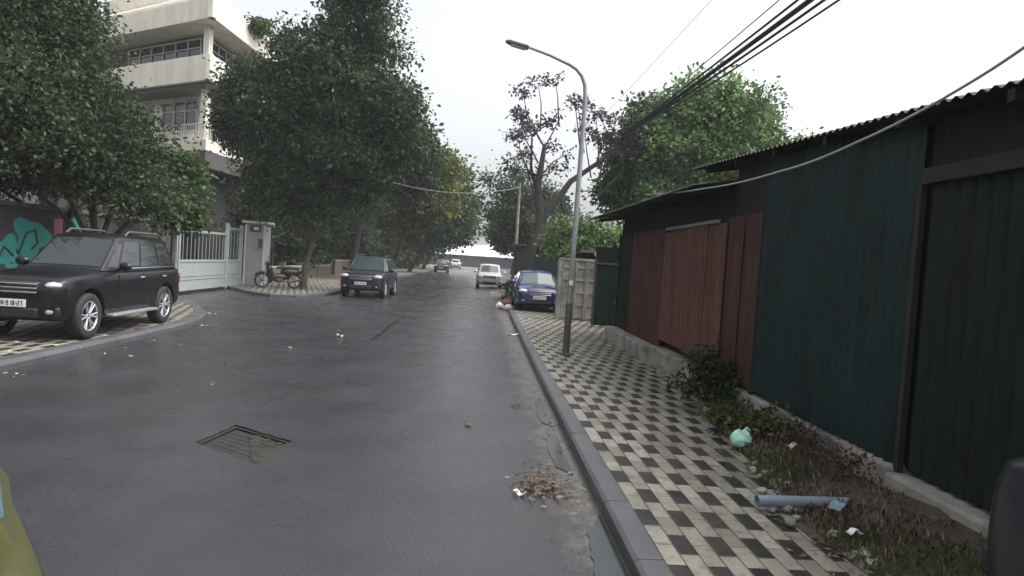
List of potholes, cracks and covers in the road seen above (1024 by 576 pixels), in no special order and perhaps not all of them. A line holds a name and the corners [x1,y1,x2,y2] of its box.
crack [328,314,422,364]
